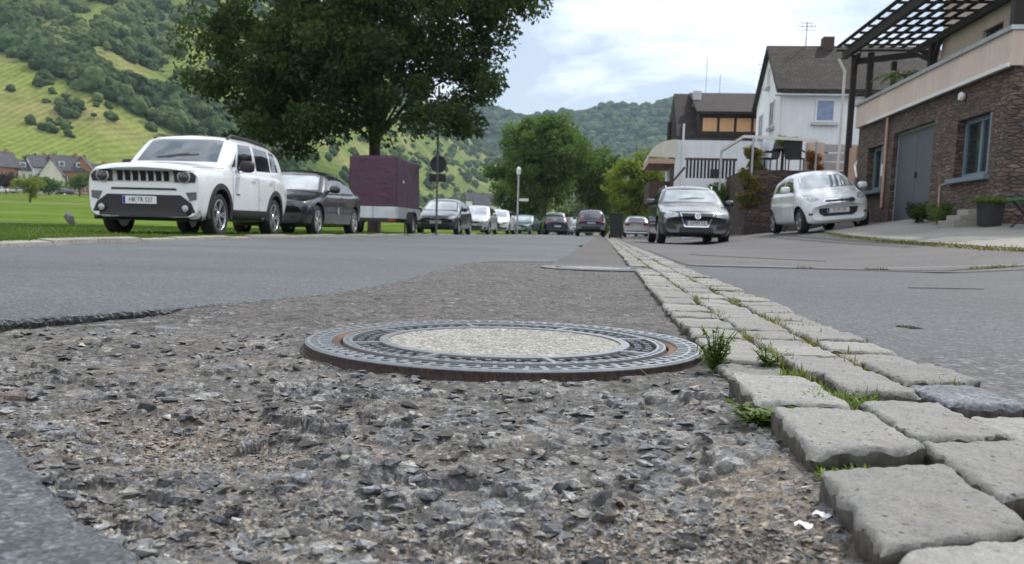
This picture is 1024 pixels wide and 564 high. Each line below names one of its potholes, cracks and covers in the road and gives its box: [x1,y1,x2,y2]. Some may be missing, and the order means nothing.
manhole cover [304,320,704,382]
